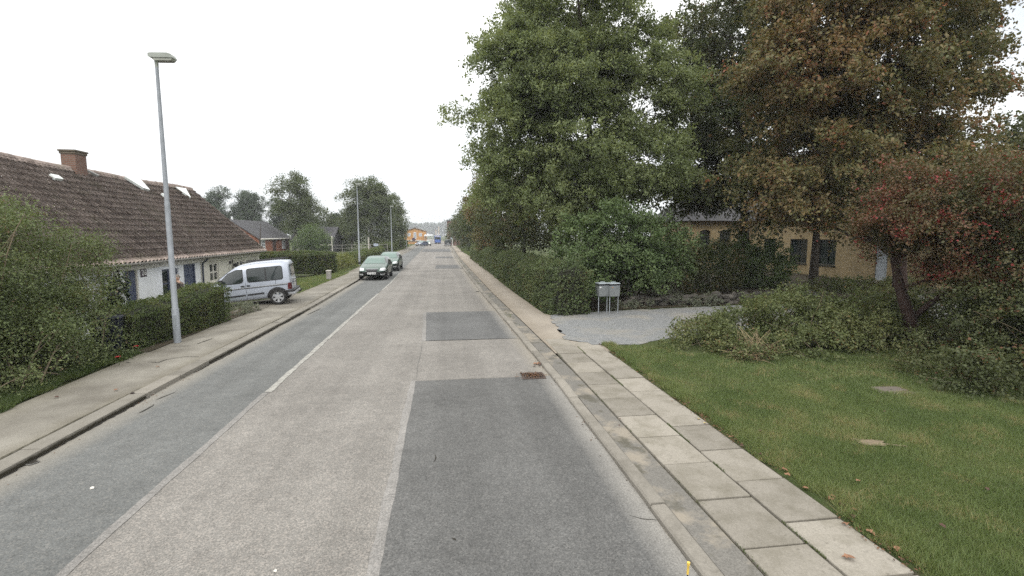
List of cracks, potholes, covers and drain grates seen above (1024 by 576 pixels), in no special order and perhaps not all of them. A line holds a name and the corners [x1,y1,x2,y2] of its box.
drain grate [515,371,549,379]
